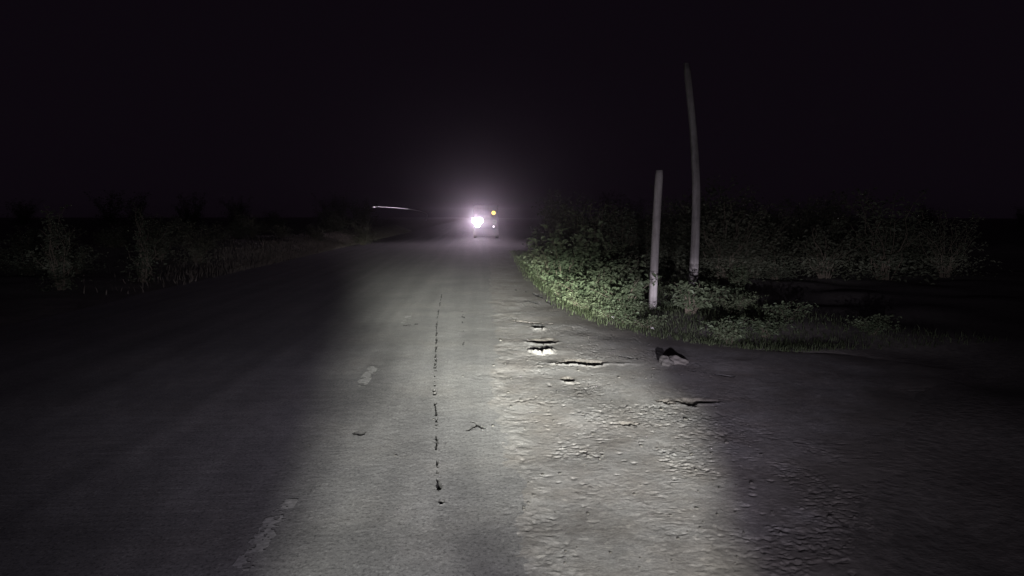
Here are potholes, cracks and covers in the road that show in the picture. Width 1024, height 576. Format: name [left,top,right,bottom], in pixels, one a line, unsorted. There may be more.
pothole [526,337,559,345]
crack [403,294,445,504]
